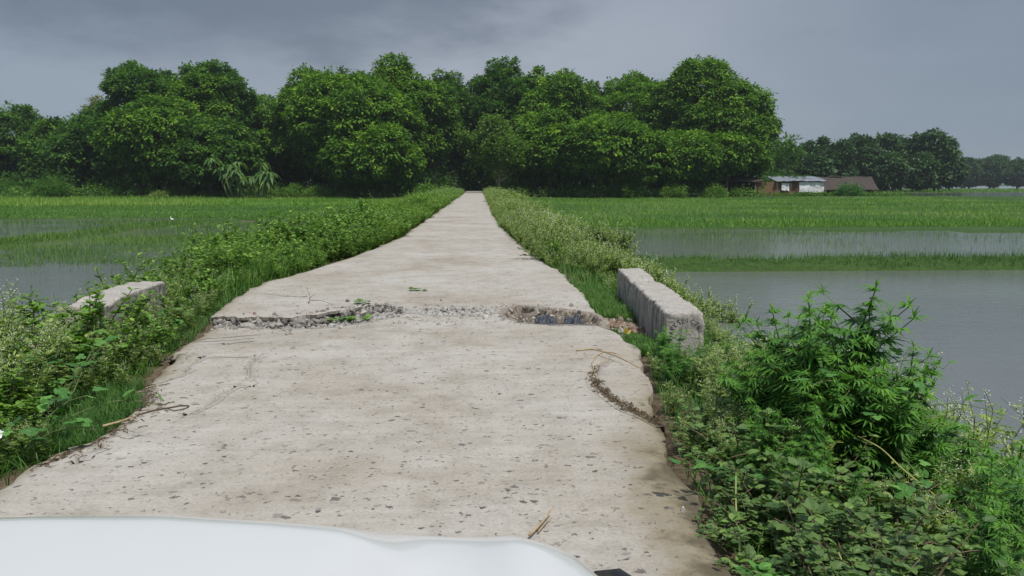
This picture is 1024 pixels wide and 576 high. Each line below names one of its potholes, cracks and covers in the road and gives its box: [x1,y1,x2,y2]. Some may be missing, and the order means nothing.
pothole [497,304,607,328]
crack [146,334,264,415]
pothole [412,305,500,317]
pothole [285,303,415,329]
crack [585,359,671,433]
crack [47,439,113,464]
